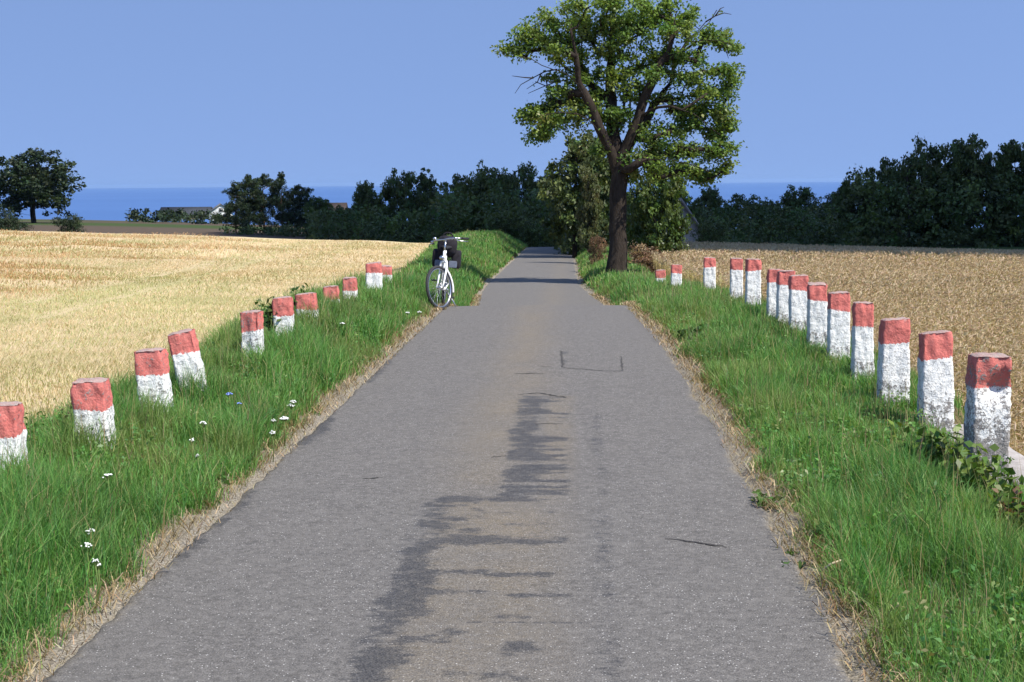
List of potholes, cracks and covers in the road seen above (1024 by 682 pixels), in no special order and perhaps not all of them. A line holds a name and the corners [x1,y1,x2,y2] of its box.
crack [665,538,725,547]
